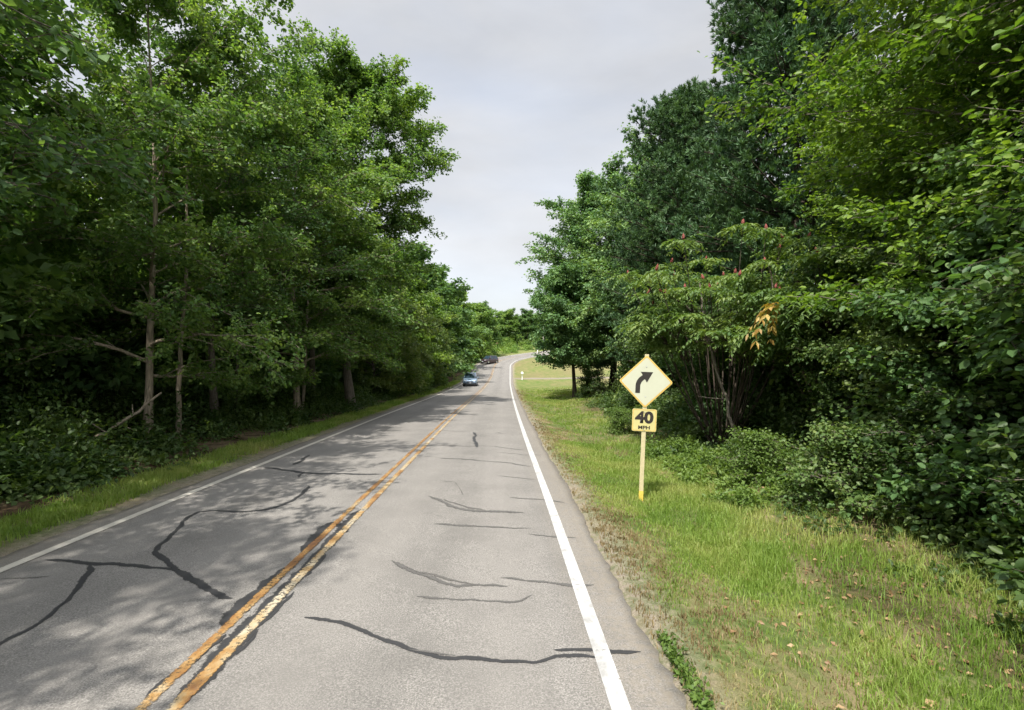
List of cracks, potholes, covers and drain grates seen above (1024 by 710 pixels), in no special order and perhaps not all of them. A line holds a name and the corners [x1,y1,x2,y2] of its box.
crack [264,455,376,477]
crack [430,419,576,538]
crack [305,560,641,664]
